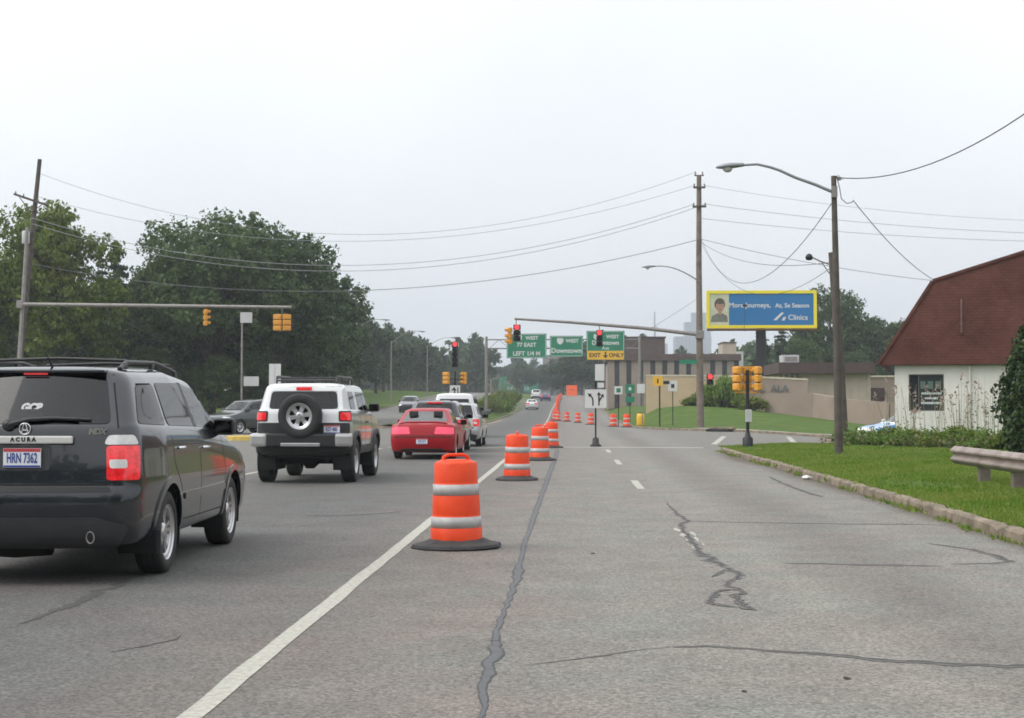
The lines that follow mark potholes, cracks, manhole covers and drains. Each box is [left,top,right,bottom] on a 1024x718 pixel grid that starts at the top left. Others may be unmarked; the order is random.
crack [786,543,1017,566]
crack [112,636,180,652]
crack [769,477,822,497]
